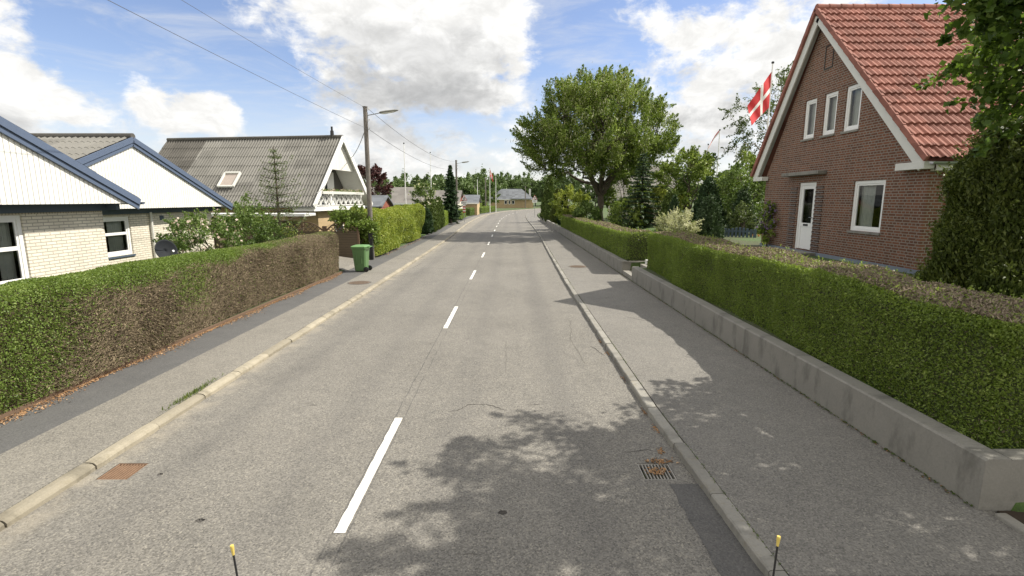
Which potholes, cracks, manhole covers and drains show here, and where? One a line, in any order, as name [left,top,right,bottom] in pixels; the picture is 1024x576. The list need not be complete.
drain grate [95,463,149,480]
drain grate [637,463,678,480]
